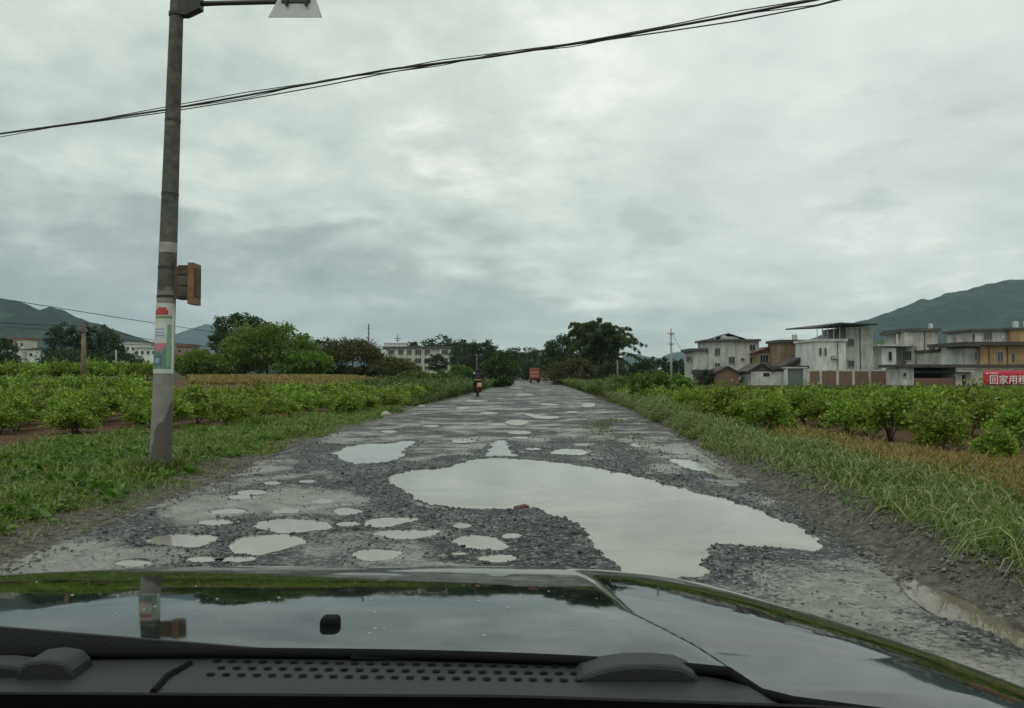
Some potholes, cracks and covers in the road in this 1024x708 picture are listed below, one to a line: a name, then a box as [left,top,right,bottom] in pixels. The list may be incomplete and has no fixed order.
pothole [350,548,402,561]
pothole [375,456,846,583]
pothole [327,439,422,465]
pothole [252,518,333,534]
pothole [146,532,219,547]
pothole [112,558,157,566]
pothole [223,533,306,556]
pothole [362,517,418,528]
pothole [480,439,522,458]
